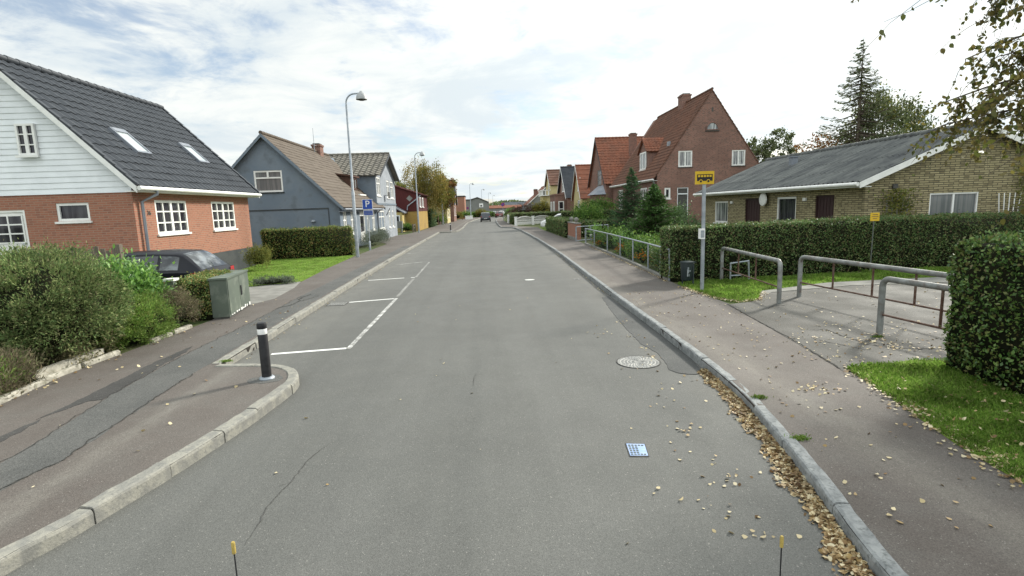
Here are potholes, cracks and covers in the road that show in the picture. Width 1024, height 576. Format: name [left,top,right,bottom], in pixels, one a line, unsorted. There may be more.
crack [245,443,330,545]
manhole cover [616,356,661,369]
